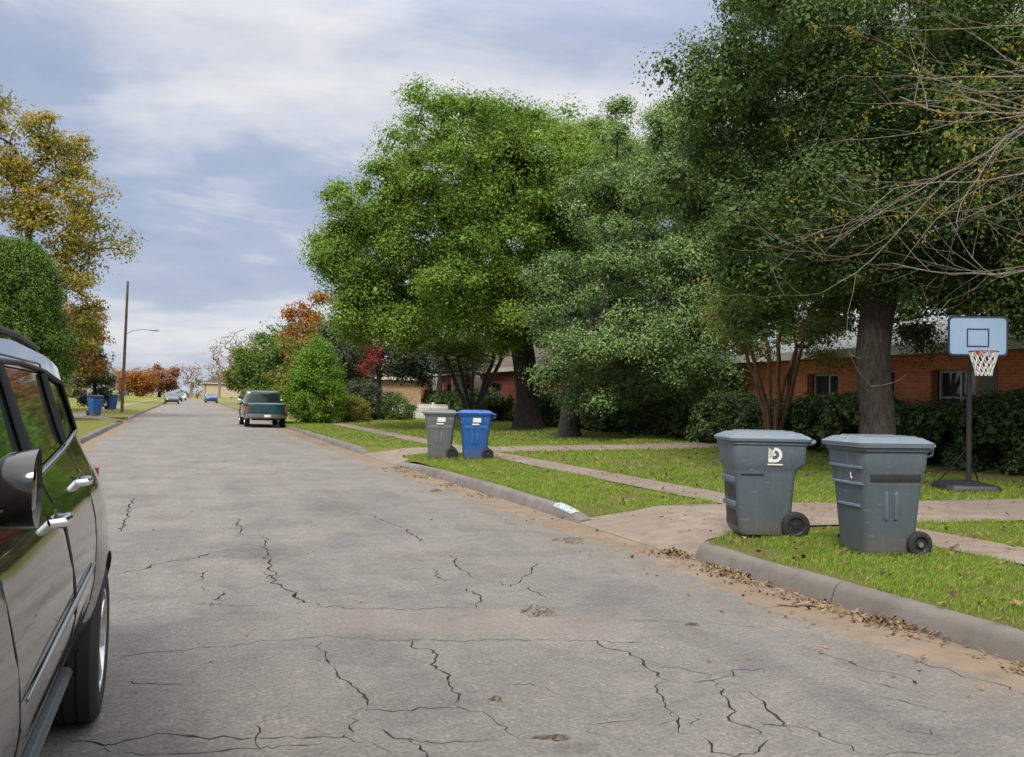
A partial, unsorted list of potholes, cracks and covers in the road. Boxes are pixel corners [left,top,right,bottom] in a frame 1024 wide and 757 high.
crack [117,498,134,532]
crack [85,635,959,757]
crack [501,562,552,599]
pothole [521,604,558,617]
crack [186,514,482,610]
